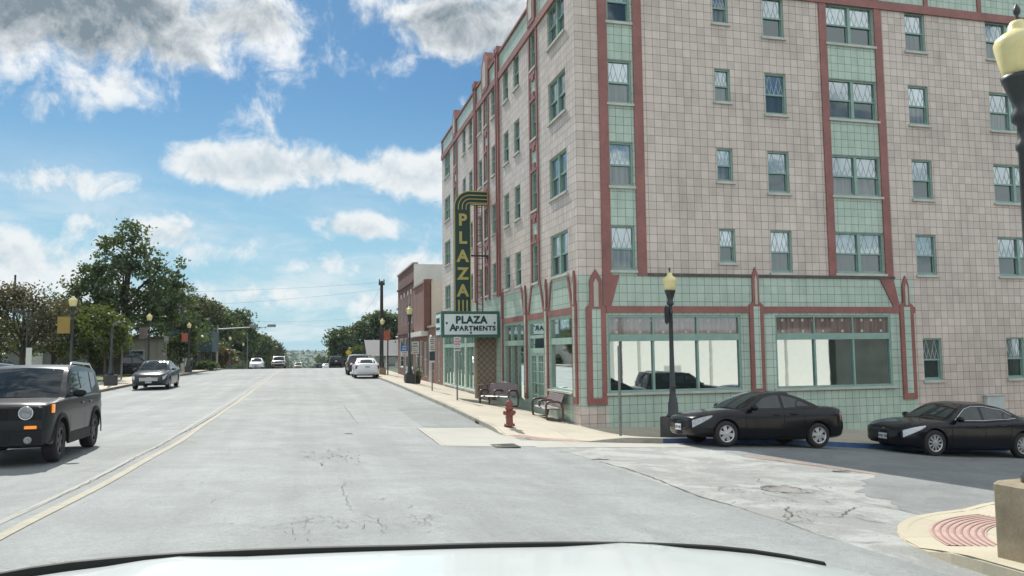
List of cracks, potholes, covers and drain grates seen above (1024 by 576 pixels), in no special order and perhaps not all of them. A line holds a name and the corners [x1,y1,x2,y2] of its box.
crack [709,479,896,525]
crack [263,481,445,540]
pothole [745,485,815,494]
